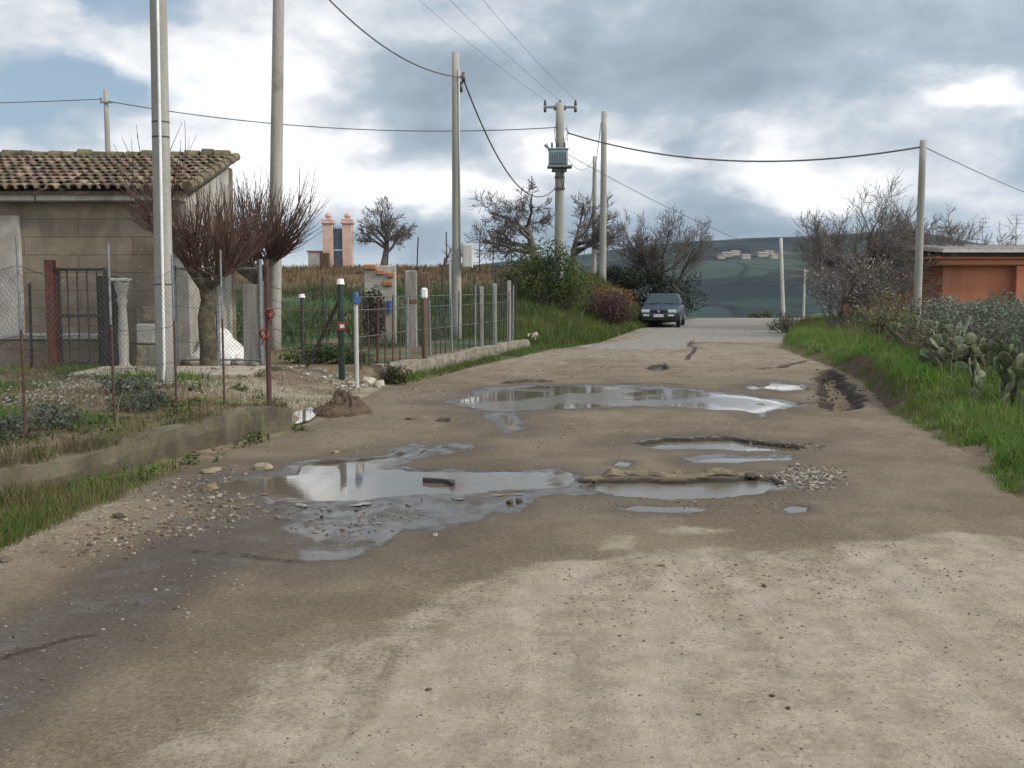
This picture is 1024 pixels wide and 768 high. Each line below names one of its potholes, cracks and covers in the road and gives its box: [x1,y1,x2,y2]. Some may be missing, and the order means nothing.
pothole [440,384,805,417]
crack [0,634,96,660]
pothole [643,363,671,372]
pothole [632,436,805,451]
pothole [677,454,794,464]
pothole [761,382,807,391]
pothole [250,486,601,561]
pothole [574,467,789,500]
pothole [778,504,816,513]
pothole [807,368,874,412]
